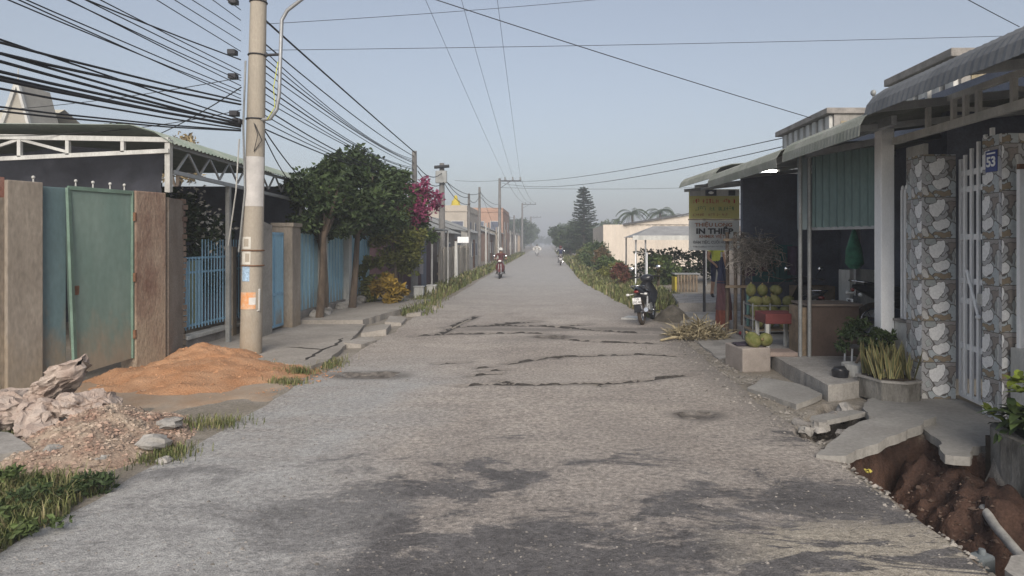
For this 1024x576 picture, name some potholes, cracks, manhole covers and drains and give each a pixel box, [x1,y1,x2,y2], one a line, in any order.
crack [296,338,343,360]
pothole [673,411,717,419]
crack [420,316,685,387]
pothole [333,371,399,379]
